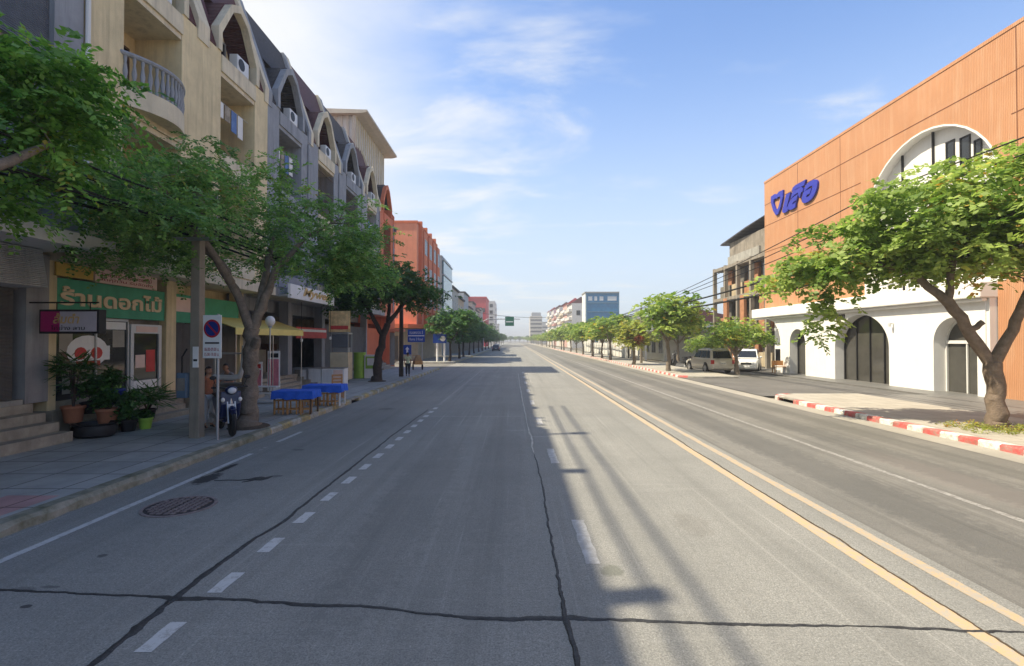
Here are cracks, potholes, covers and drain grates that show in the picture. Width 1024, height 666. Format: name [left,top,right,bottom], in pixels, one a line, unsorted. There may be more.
manhole cover [139,495,218,518]
